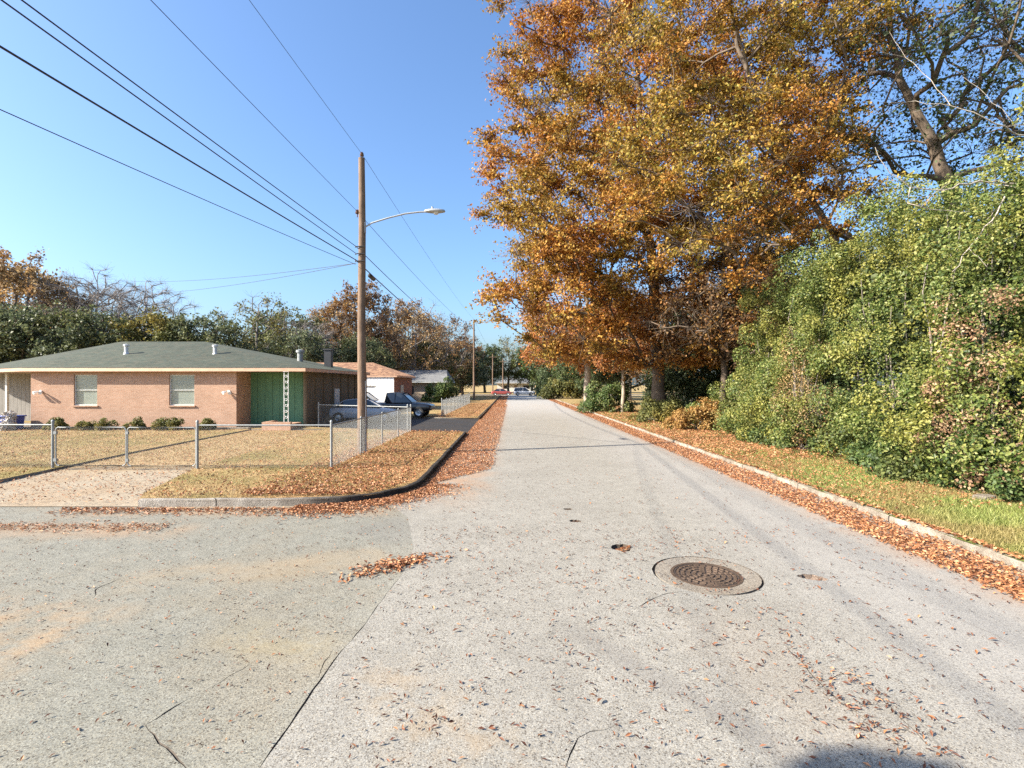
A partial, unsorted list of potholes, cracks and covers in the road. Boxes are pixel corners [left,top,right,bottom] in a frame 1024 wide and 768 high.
manhole cover [652,556,764,595]
crack [146,664,250,768]
crack [566,723,619,766]
